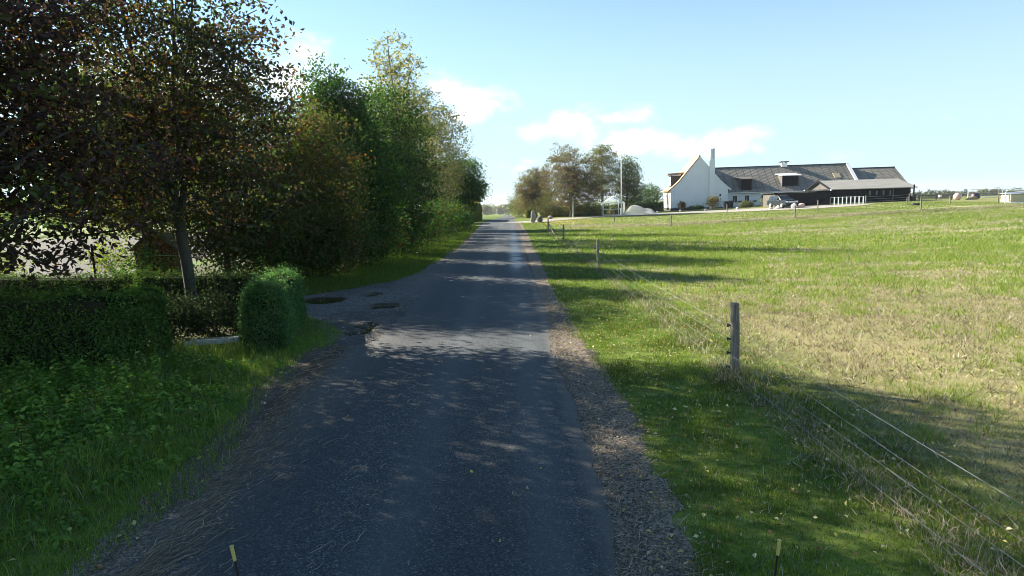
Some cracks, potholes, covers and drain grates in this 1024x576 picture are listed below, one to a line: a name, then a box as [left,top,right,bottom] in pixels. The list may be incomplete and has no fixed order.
pothole [340,321,378,336]
